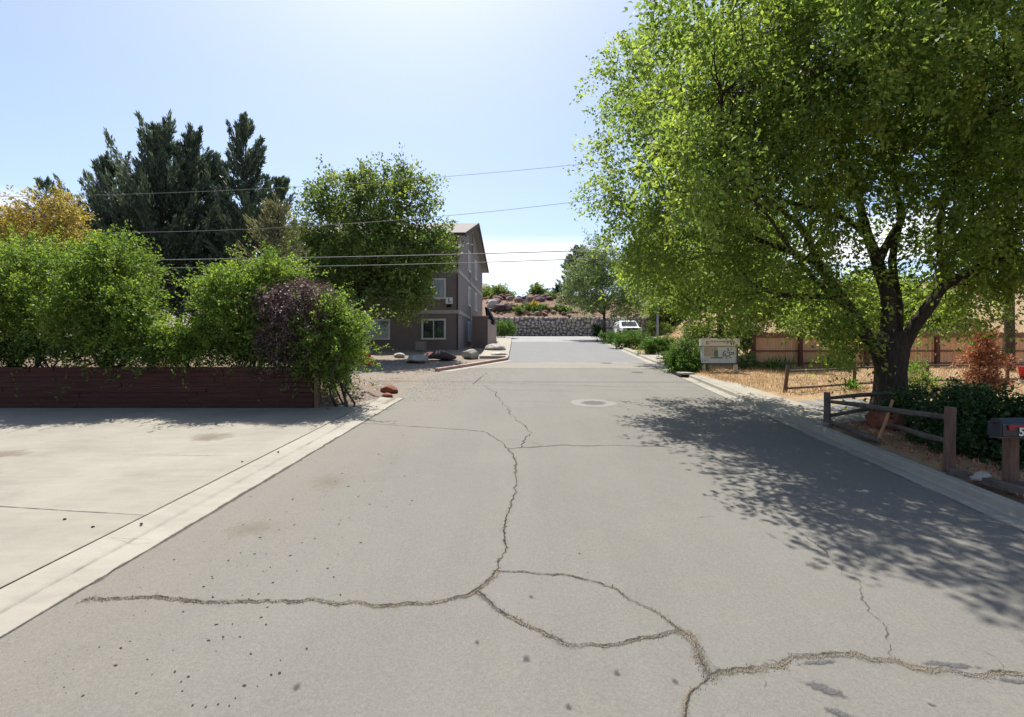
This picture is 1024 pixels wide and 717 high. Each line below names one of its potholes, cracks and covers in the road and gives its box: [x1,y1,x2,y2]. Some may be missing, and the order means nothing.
crack [0,385,1024,717]
manhole cover [571,399,617,407]
